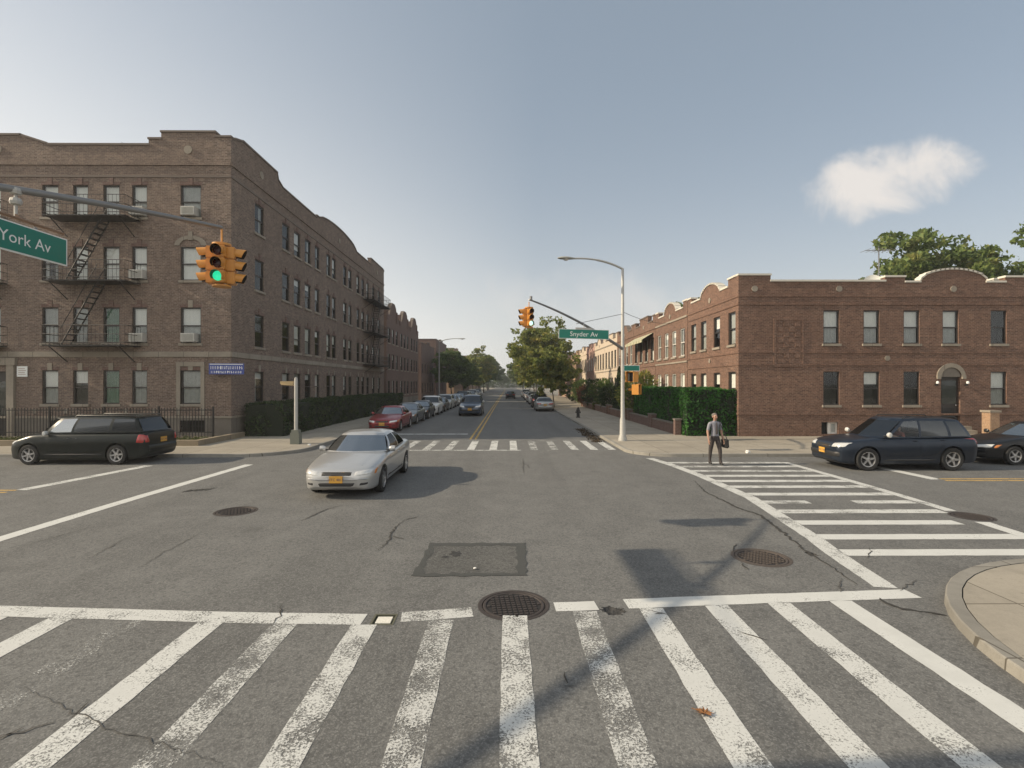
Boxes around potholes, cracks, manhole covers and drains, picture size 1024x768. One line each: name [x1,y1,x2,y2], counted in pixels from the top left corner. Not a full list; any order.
manhole cover [947,512,998,522]
utility cover [369,614,398,625]
manhole cover [212,506,258,516]
manhole cover [731,548,793,567]
crack [879,579,945,615]
pothole [599,606,626,615]
crack [0,686,216,762]
manhole cover [478,590,550,621]
